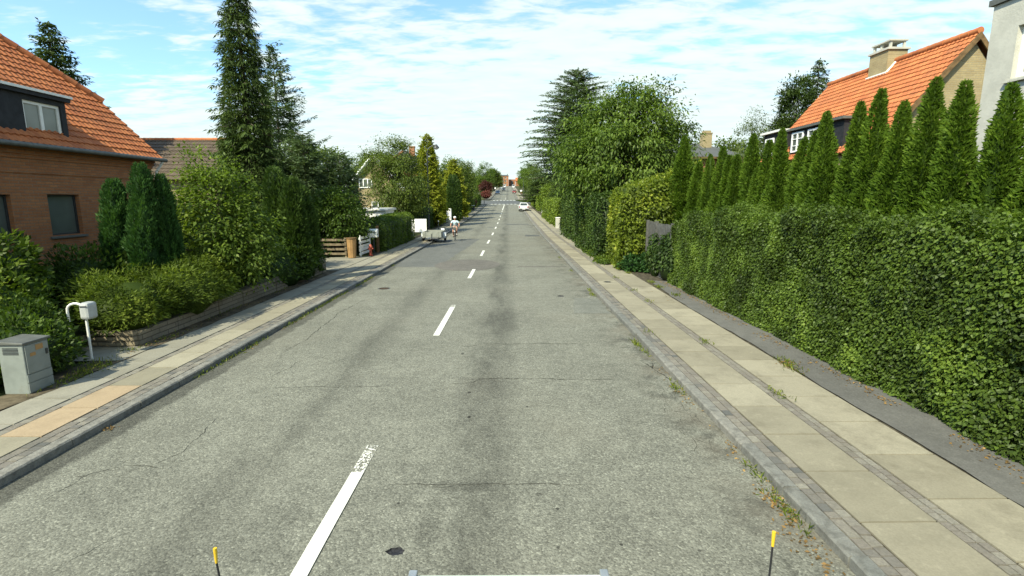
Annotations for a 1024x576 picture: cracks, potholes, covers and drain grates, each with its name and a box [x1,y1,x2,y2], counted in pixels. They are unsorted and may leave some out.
pothole [385,547,405,556]
